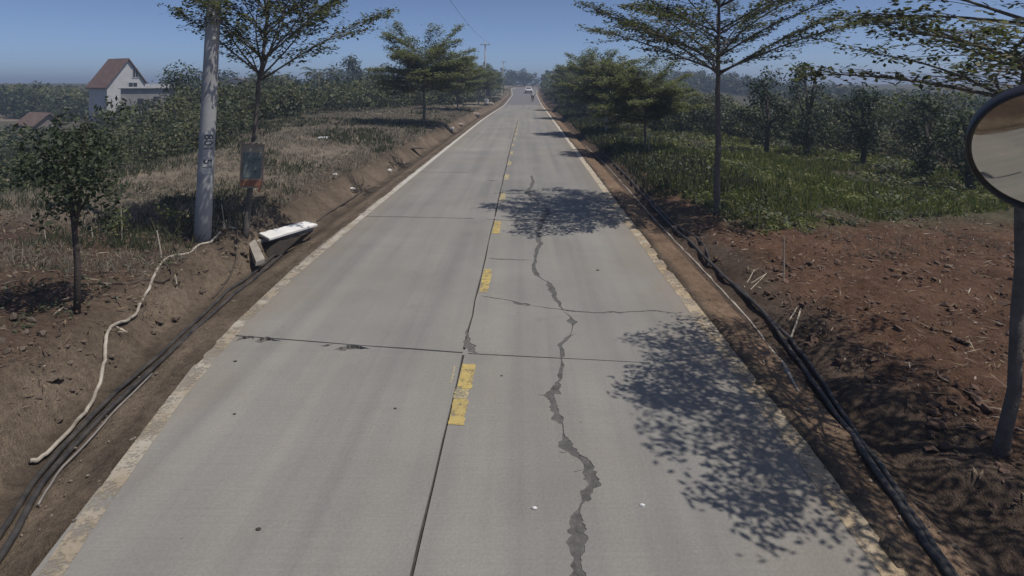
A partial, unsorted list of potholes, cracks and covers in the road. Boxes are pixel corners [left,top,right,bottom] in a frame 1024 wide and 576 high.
crack [490,176,668,576]
